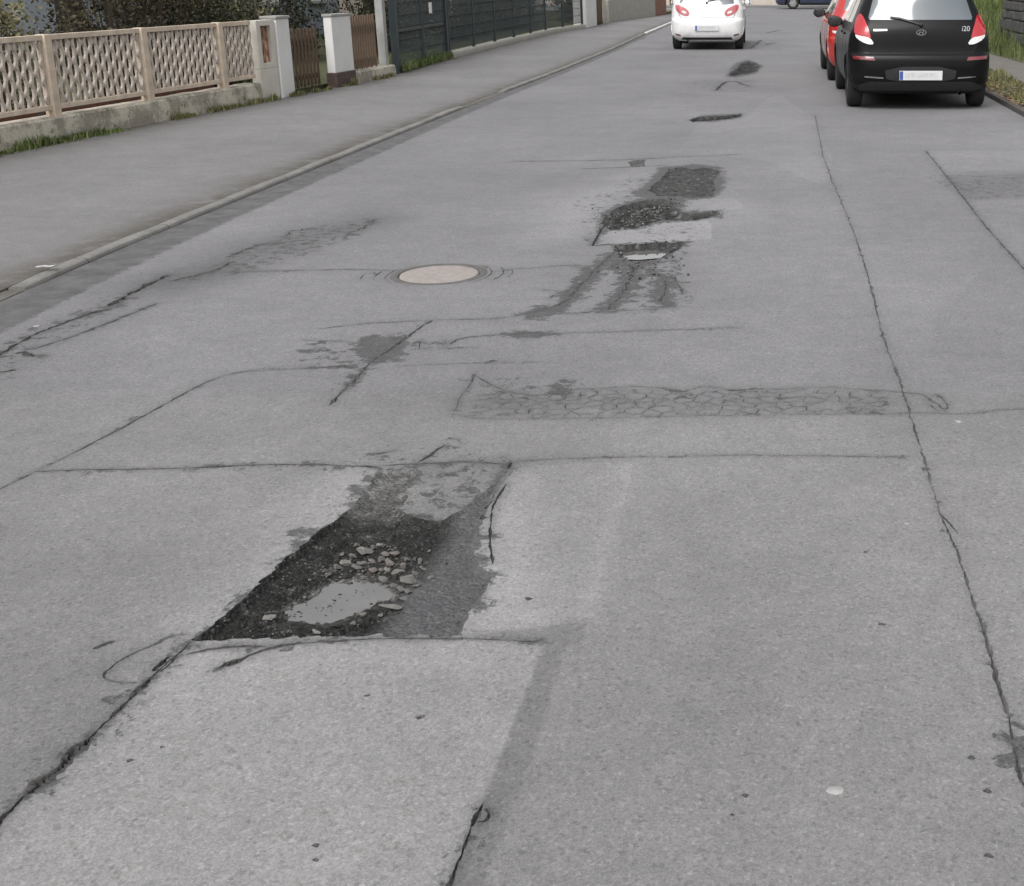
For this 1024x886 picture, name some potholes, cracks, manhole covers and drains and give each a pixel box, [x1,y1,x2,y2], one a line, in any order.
pothole [191,469,512,641]
crack [322,226,683,405]
crack [456,118,1024,786]
crack [0,634,536,827]
pothole [689,114,742,122]
crack [0,221,374,373]
crack [377,445,512,564]
manhole cover [390,263,488,285]
pothole [600,199,720,230]
crack [446,804,491,886]
pothole [728,61,761,76]
pothole [613,242,686,261]
